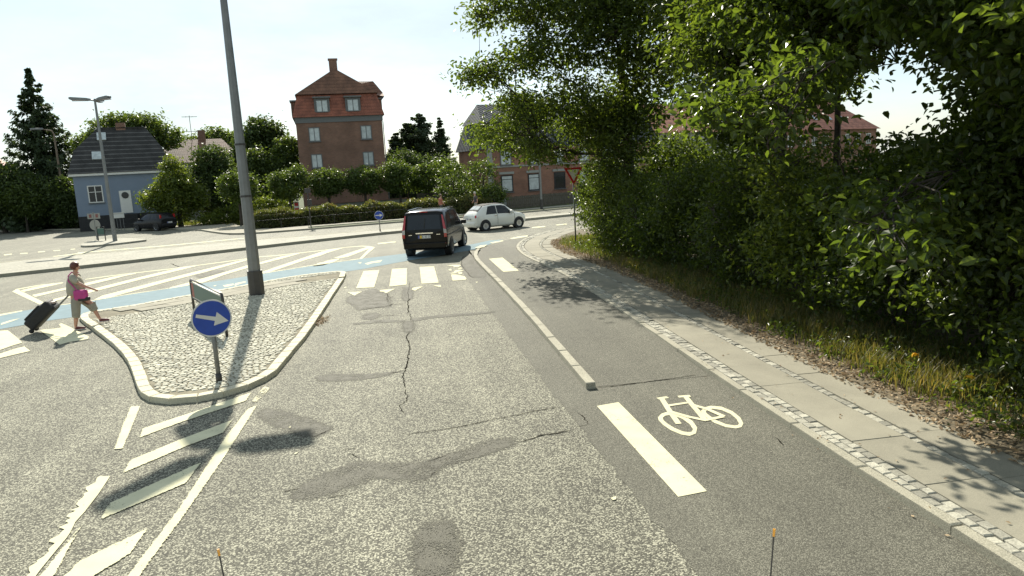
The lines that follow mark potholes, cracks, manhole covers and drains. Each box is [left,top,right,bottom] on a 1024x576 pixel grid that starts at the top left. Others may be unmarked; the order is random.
crack [410,406,588,477]
crack [369,283,412,411]
